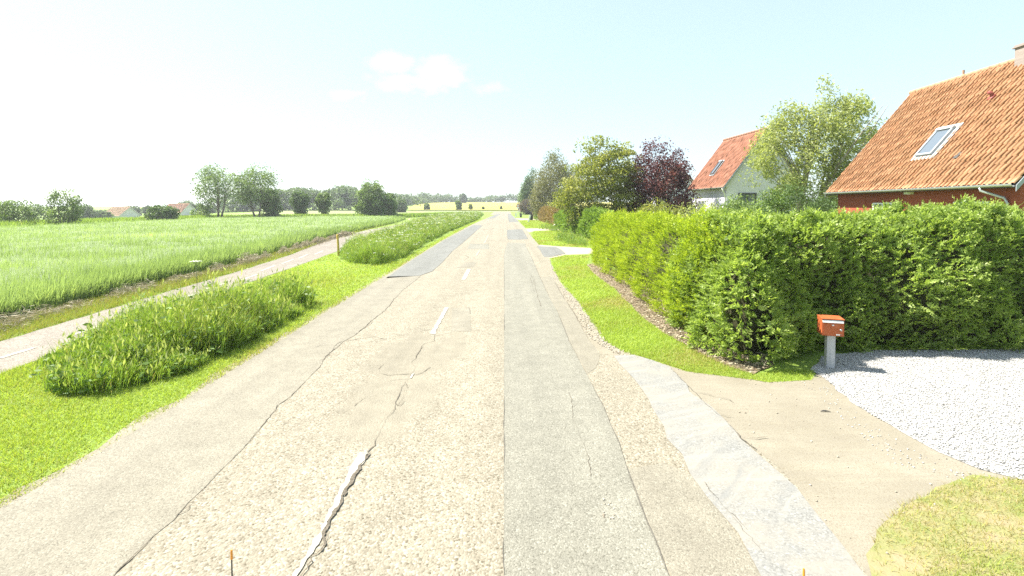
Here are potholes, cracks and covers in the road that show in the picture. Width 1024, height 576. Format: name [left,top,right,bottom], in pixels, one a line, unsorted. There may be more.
crack [300,329,446,576]
